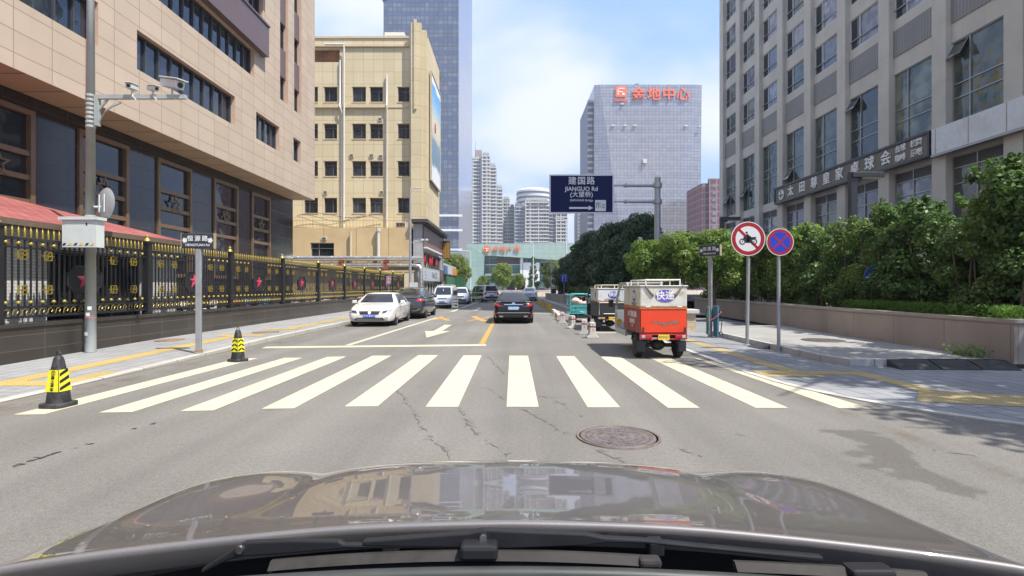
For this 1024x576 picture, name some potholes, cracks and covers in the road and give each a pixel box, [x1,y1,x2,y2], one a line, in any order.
crack [483,357,580,434]
crack [13,423,155,467]
crack [459,410,510,456]
crack [397,390,453,461]
manhole cover [576,425,662,450]
